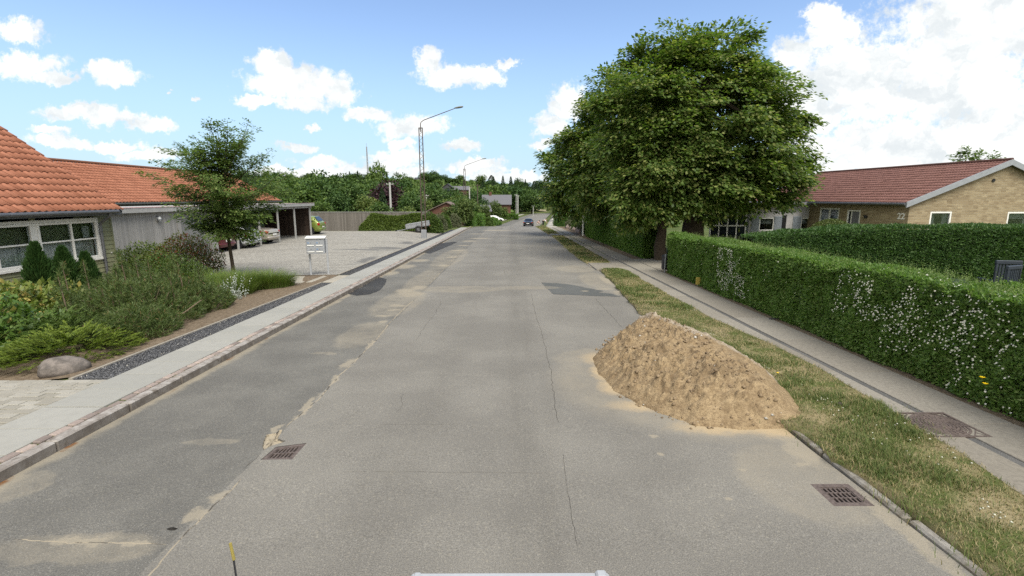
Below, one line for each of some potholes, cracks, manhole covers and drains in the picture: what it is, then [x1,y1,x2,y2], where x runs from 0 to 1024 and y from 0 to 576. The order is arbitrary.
manhole cover [893,412,992,438]
drain grate [261,443,306,460]
drain grate [811,484,874,506]
